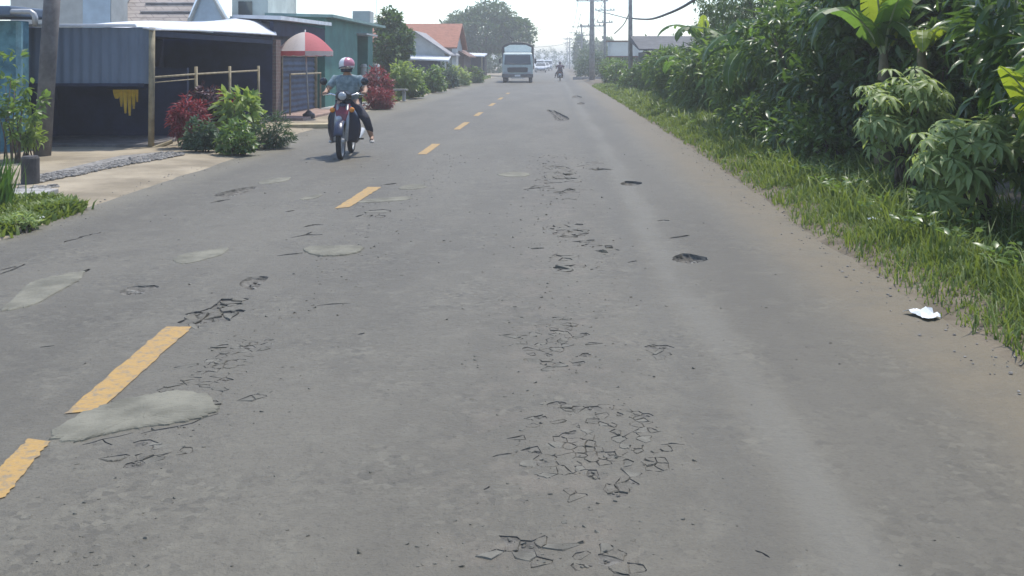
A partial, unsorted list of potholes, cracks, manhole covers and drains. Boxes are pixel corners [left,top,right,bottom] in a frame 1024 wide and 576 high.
crack [530,223,635,272]
pothole [213,187,256,197]
crack [493,401,684,503]
crack [475,535,647,576]
crack [83,297,274,468]
pothole [672,253,708,263]
crack [523,161,610,200]
pothole [547,110,569,121]
